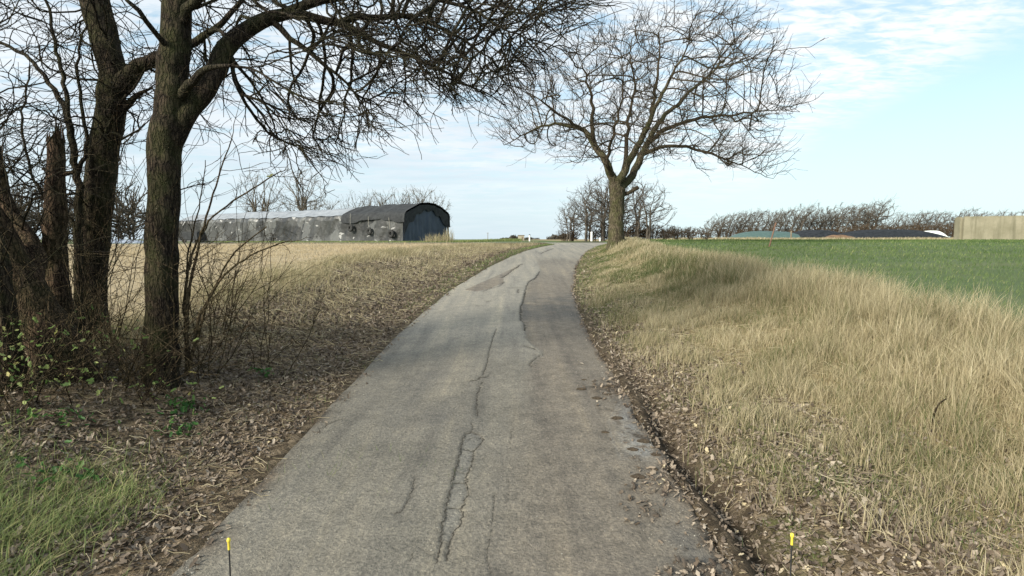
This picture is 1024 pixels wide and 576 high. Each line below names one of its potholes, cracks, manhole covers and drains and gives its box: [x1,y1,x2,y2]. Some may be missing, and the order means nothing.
crack [488,264,543,363]
crack [436,423,483,563]
